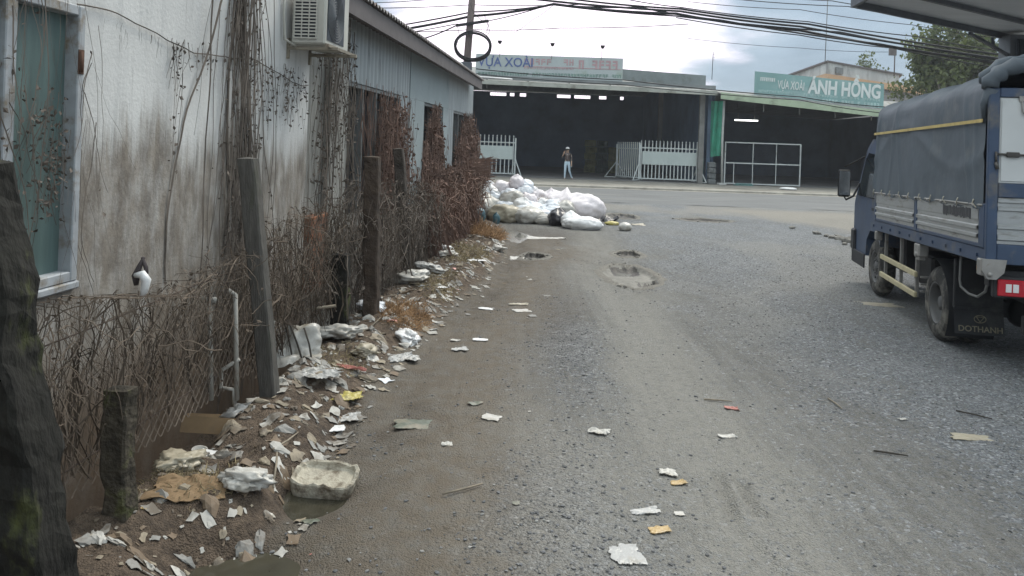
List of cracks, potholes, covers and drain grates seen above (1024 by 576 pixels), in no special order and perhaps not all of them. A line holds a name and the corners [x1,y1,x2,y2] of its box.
pothole [516,252,553,261]
pothole [593,263,667,290]
pothole [608,249,648,258]
